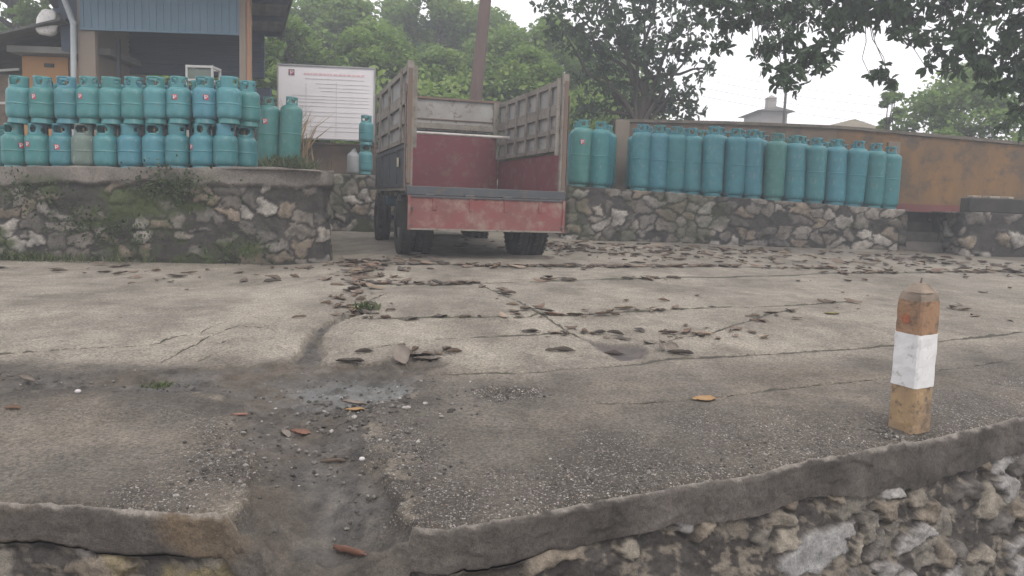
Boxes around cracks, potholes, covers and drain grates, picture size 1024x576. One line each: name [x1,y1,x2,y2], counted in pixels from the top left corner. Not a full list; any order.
pothole [587,340,648,361]
pothole [473,386,539,403]
crack [0,264,1024,375]
crack [597,360,1014,405]
